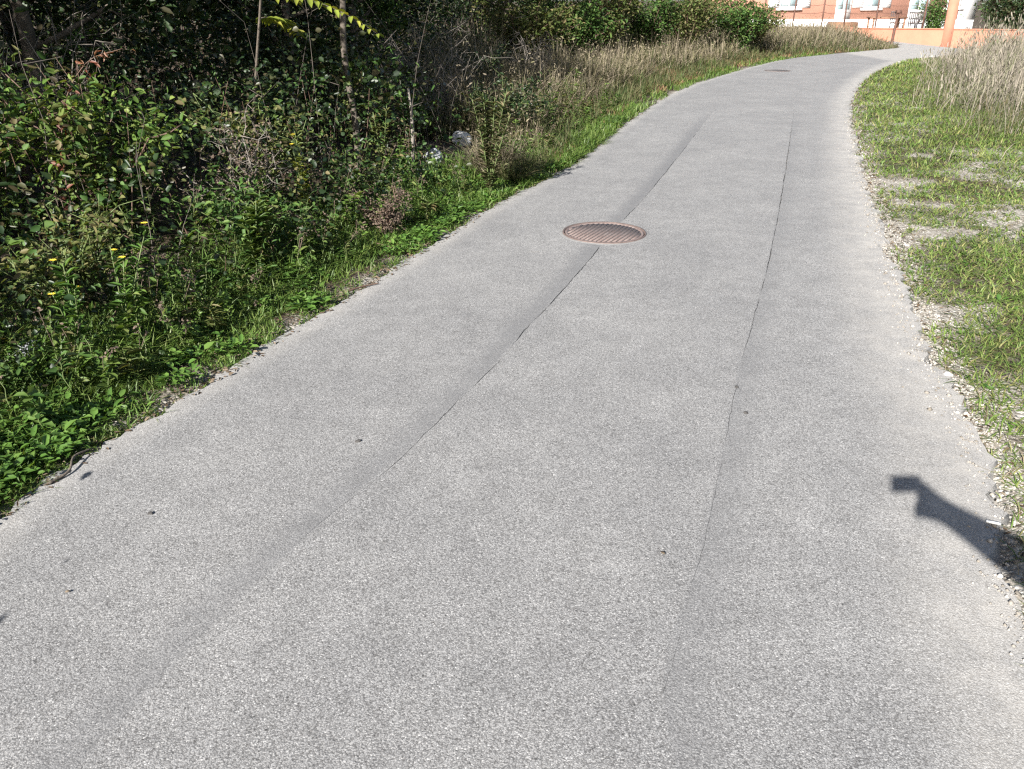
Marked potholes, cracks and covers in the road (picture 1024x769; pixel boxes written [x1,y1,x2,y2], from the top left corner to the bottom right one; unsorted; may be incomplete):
manhole cover [559,222,650,245]
